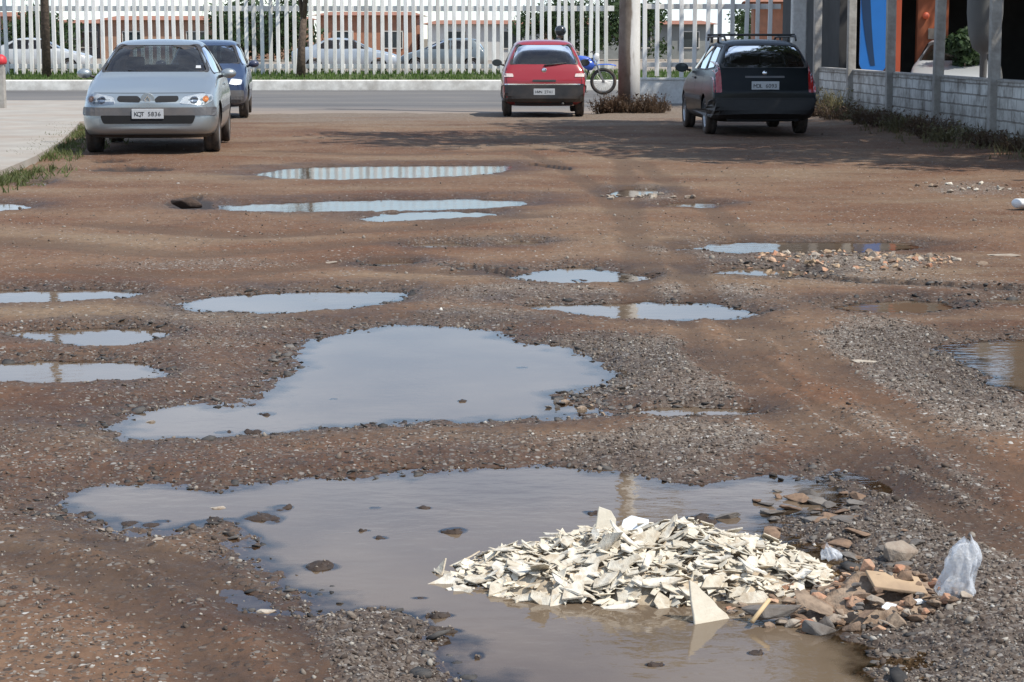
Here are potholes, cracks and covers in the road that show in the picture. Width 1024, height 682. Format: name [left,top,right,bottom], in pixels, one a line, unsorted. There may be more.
pothole [0,197,41,211]
pothole [155,193,224,210]
pothole [647,198,738,208]
pothole [493,260,641,283]
pothole [508,295,777,321]
pothole [243,161,519,180]
pothole [159,283,428,314]
pothole [0,282,156,303]
pothole [602,185,673,197]
pothole [345,208,508,222]
pothole [8,452,958,682]
